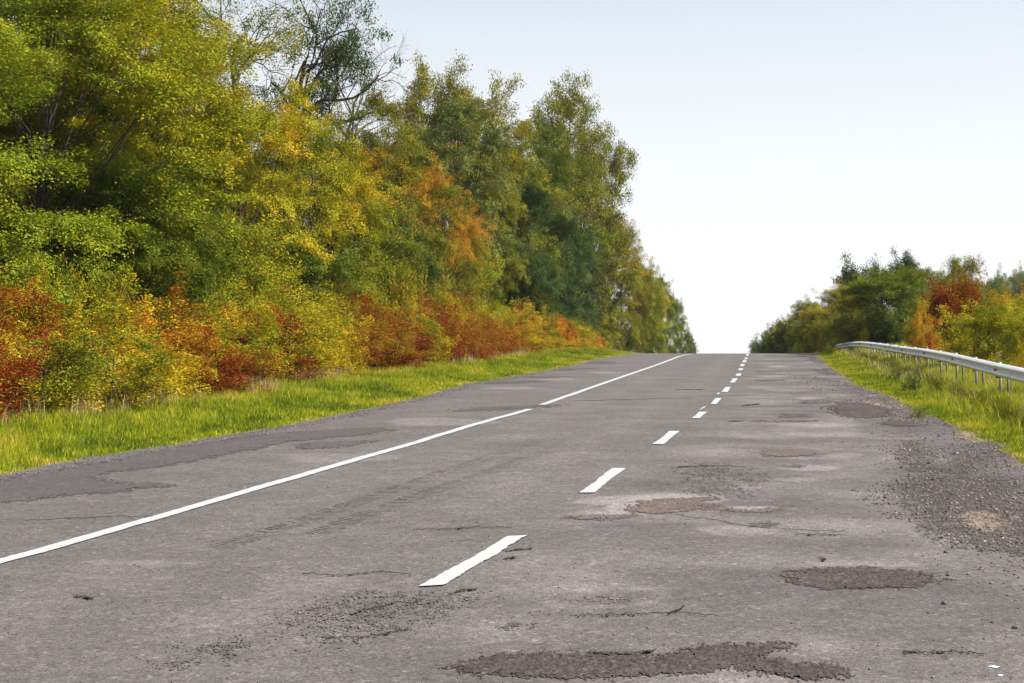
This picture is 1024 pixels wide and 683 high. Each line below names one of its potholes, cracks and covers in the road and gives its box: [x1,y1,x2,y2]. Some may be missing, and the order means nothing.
pothole [435,640,854,681]
